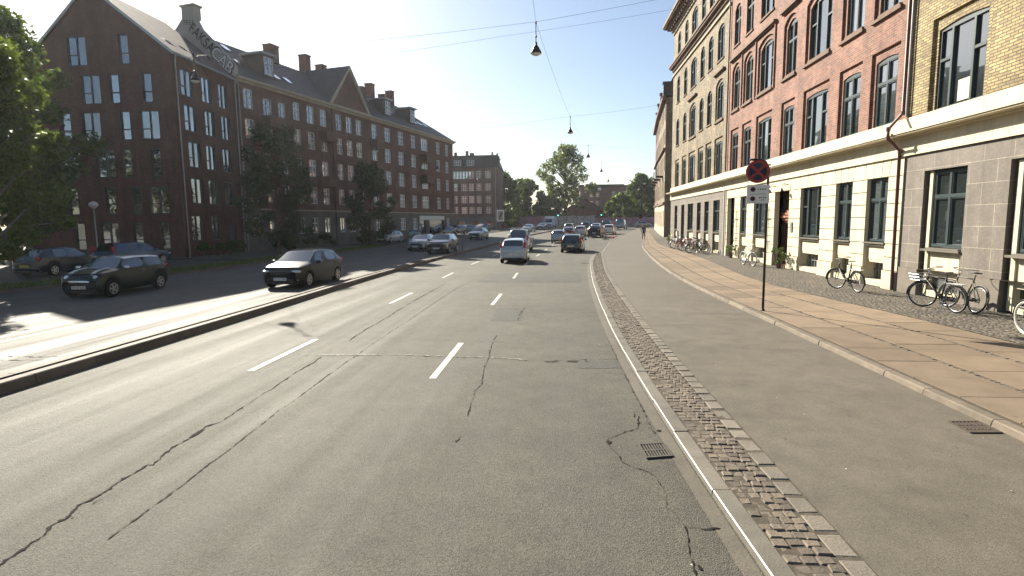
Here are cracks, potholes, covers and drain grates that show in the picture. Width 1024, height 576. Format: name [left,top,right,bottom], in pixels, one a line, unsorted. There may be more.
drain grate [638,442,674,459]
crack [0,357,322,565]
crack [467,335,497,416]
drain grate [948,420,1003,433]
crack [606,341,714,574]
